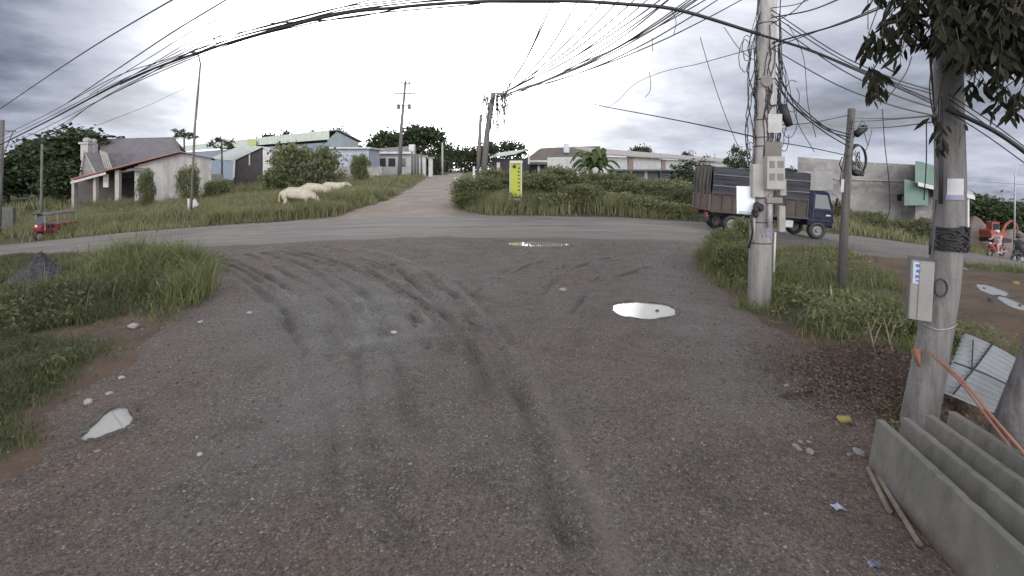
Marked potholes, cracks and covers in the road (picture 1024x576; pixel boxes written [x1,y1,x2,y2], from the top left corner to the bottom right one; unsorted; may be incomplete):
pothole [69,403,142,444]
pothole [608,300,681,320]
